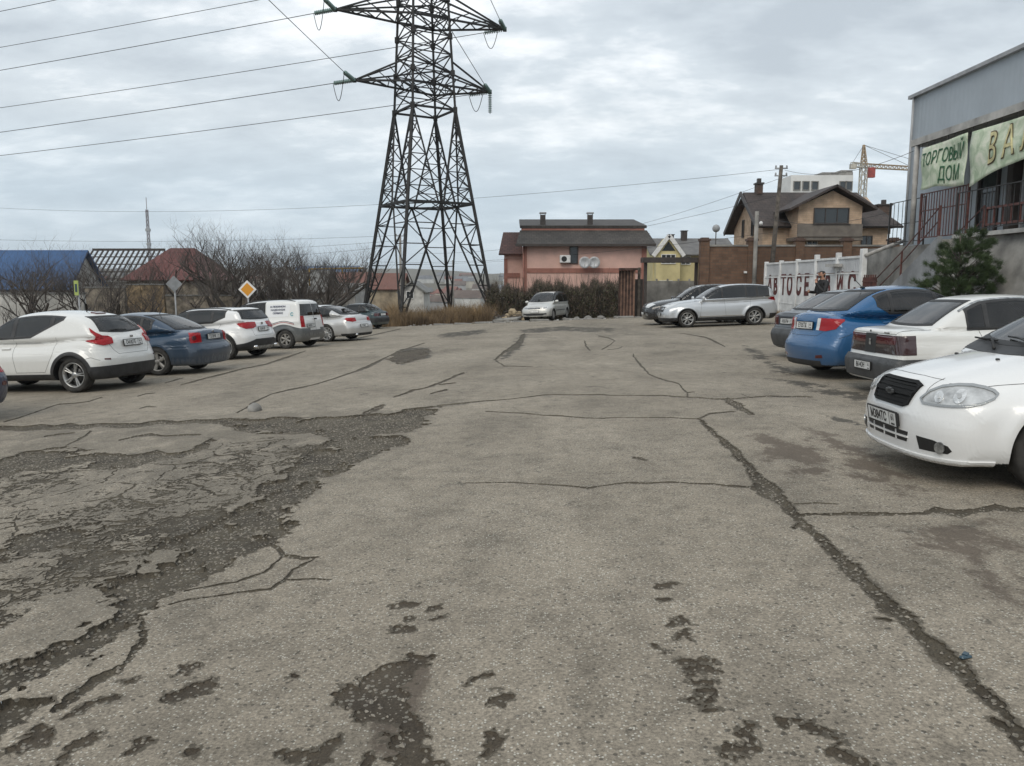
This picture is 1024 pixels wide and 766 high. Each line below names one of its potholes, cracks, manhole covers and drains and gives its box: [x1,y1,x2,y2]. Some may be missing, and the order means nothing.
pothole [675,657,723,682]
crack [437,336,1024,753]
pothole [124,736,155,756]
pothole [4,723,55,754]
pothole [330,653,446,766]
pothole [721,721,762,756]
pothole [390,625,416,633]
pothole [695,687,717,704]
